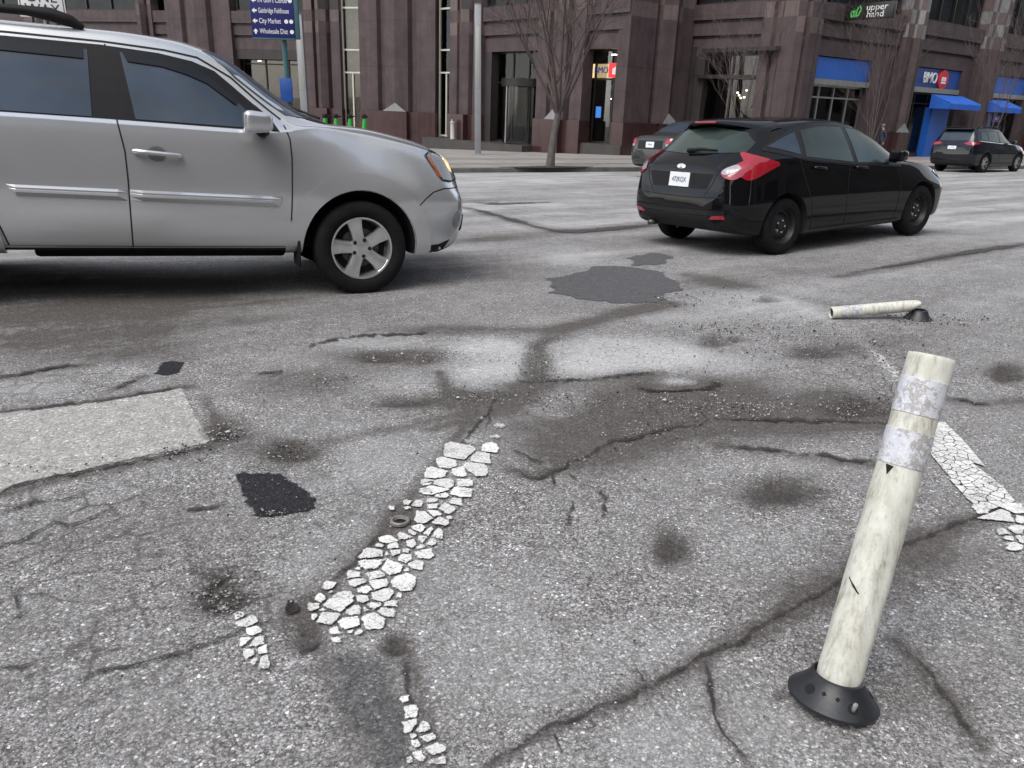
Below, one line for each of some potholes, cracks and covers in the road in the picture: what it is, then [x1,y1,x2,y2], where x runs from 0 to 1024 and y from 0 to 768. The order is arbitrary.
crack [1,445,205,547]
crack [493,509,999,759]
crack [514,417,884,525]
crack [186,501,225,511]
crack [310,331,427,347]
